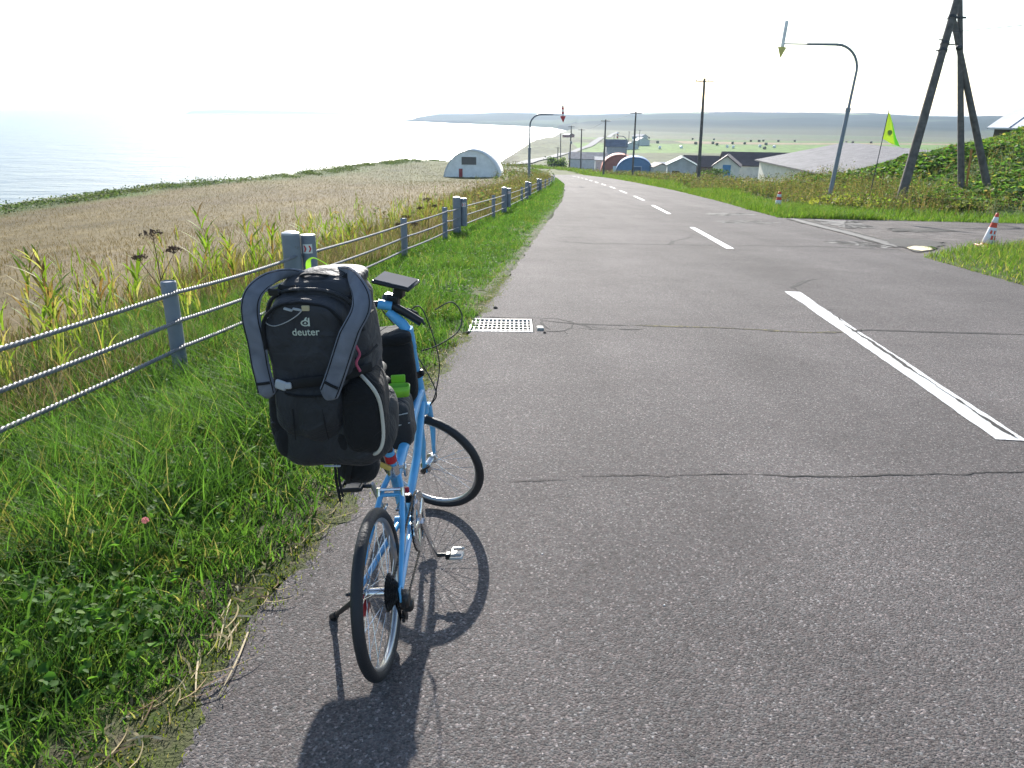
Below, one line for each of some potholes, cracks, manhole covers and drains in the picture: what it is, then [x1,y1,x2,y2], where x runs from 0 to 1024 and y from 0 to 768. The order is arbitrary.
crack [512,471,1024,482]
crack [559,234,695,245]
drain grate [466,319,534,334]
crack [498,279,1024,438]
